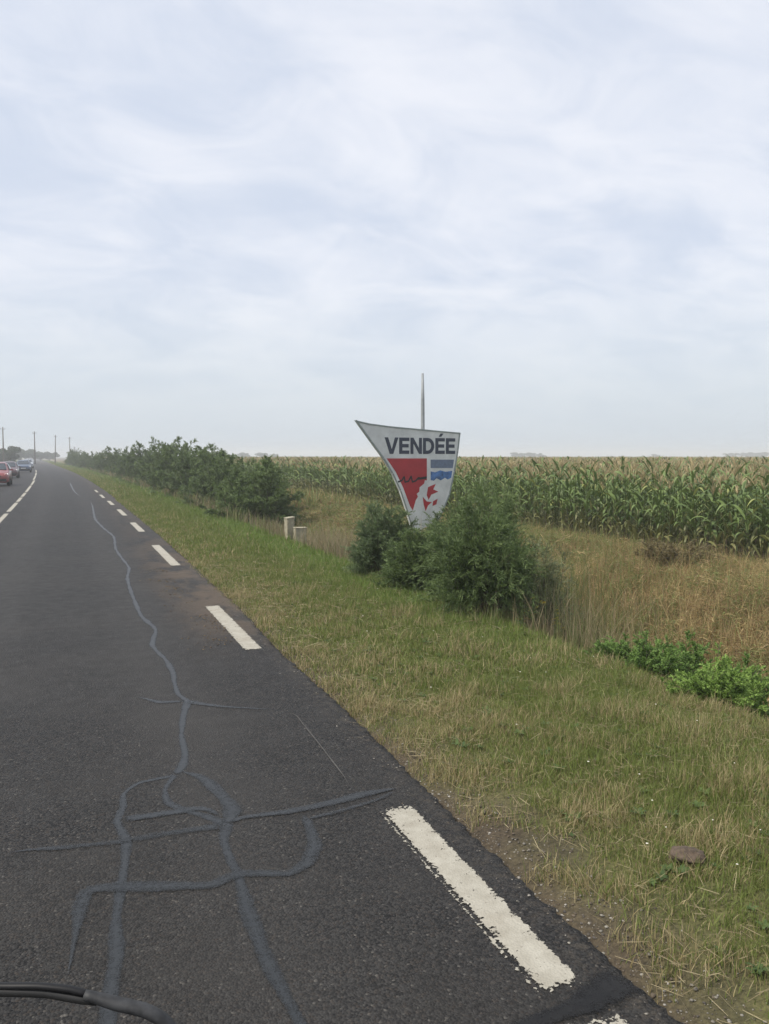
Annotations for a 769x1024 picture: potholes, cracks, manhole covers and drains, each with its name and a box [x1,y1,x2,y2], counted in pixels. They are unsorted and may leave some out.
crack [290,712,350,786]
